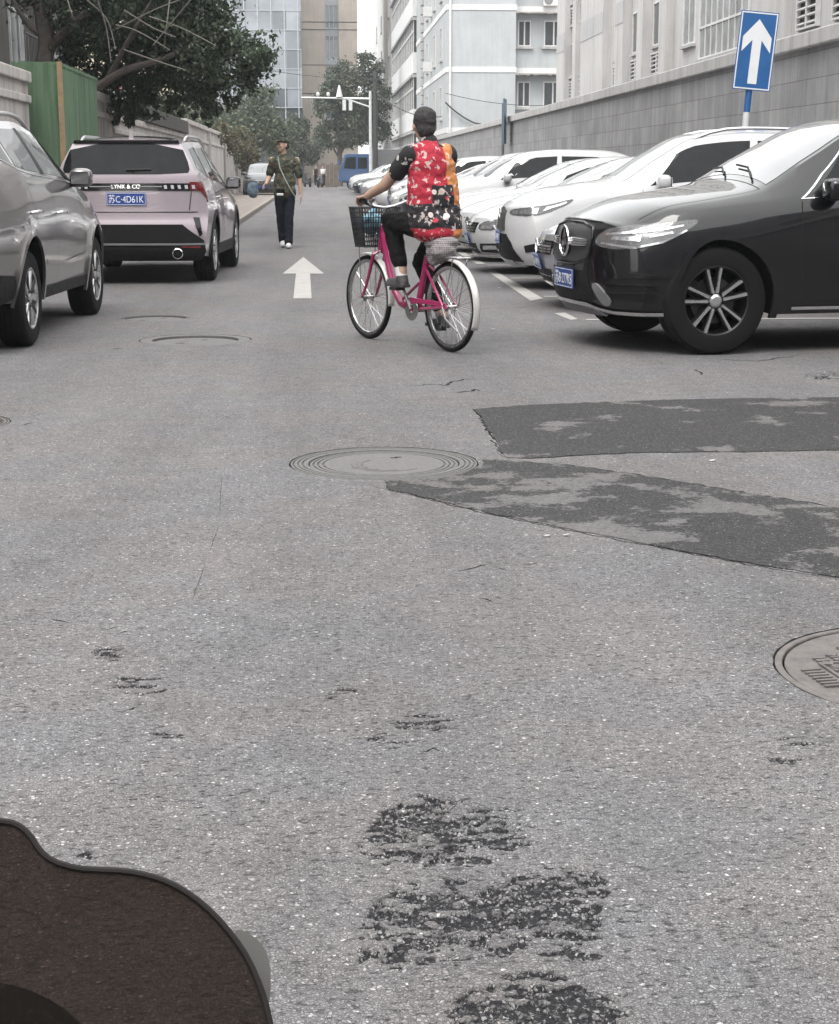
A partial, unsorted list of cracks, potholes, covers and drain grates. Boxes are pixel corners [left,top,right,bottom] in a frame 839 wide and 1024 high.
manhole cover [289,447,479,480]
pothole [355,789,547,871]
pothole [441,967,638,1024]
manhole cover [139,334,251,346]
crack [416,379,480,393]
pothole [352,862,618,978]
manhole cover [773,628,839,704]
